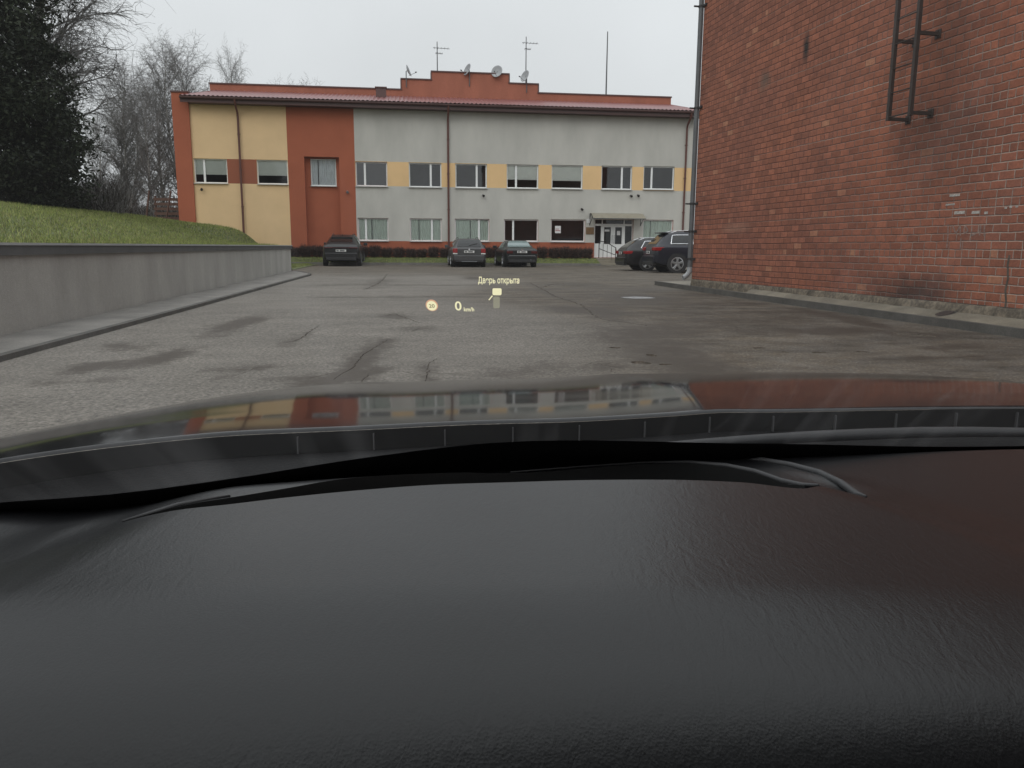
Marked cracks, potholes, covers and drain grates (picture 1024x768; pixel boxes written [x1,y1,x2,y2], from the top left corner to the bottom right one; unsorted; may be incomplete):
crack [308,340,455,381]
crack [533,283,633,324]
